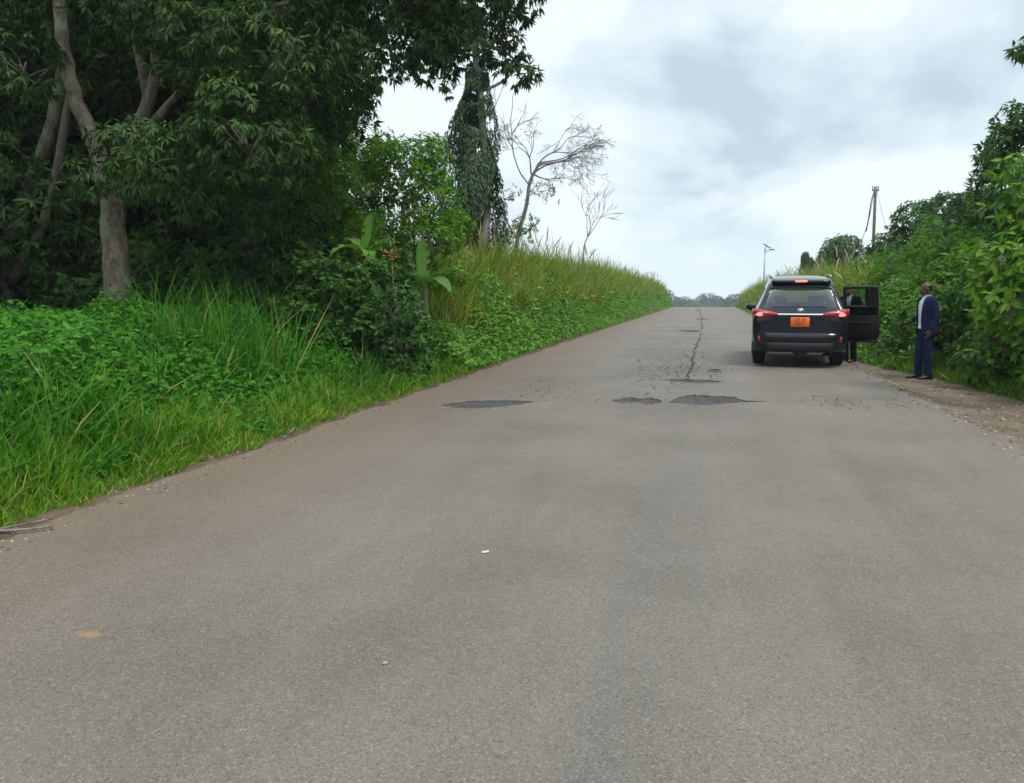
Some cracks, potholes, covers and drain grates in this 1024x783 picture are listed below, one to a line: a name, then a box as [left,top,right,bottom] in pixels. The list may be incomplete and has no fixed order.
crack [624,311,737,396]
crack [798,395,928,410]
crack [503,381,585,398]
